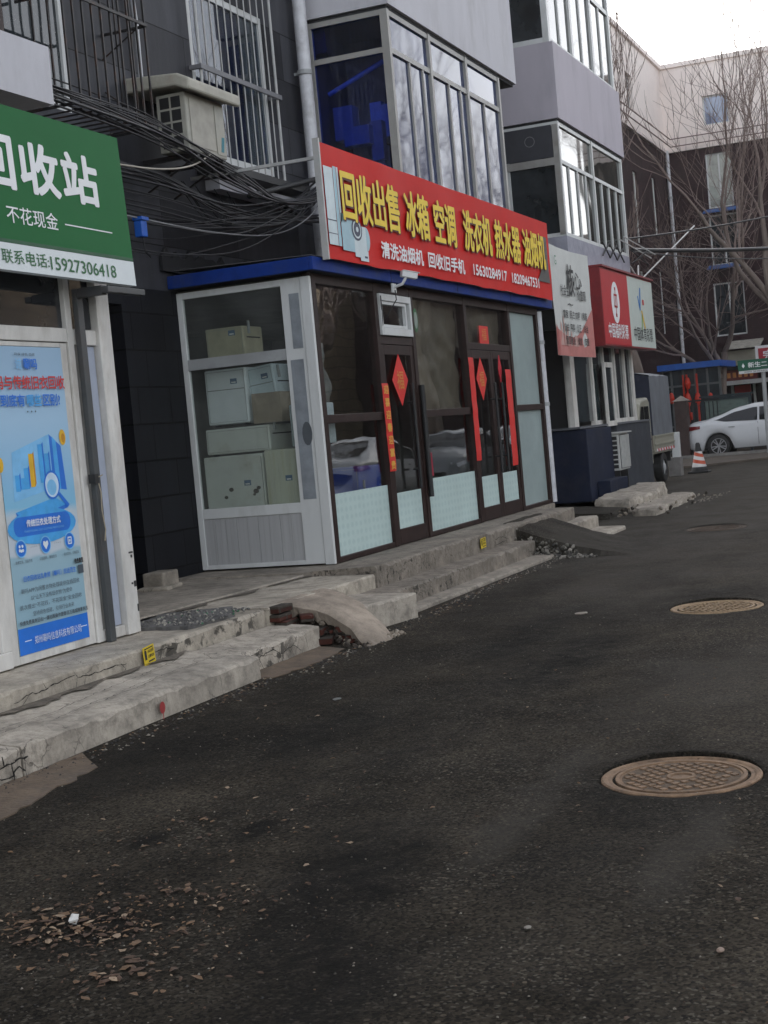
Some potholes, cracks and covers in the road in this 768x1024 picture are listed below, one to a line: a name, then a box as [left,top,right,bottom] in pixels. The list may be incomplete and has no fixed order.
manhole cover [647,597,768,618]
manhole cover [673,523,761,534]
manhole cover [560,750,768,810]
